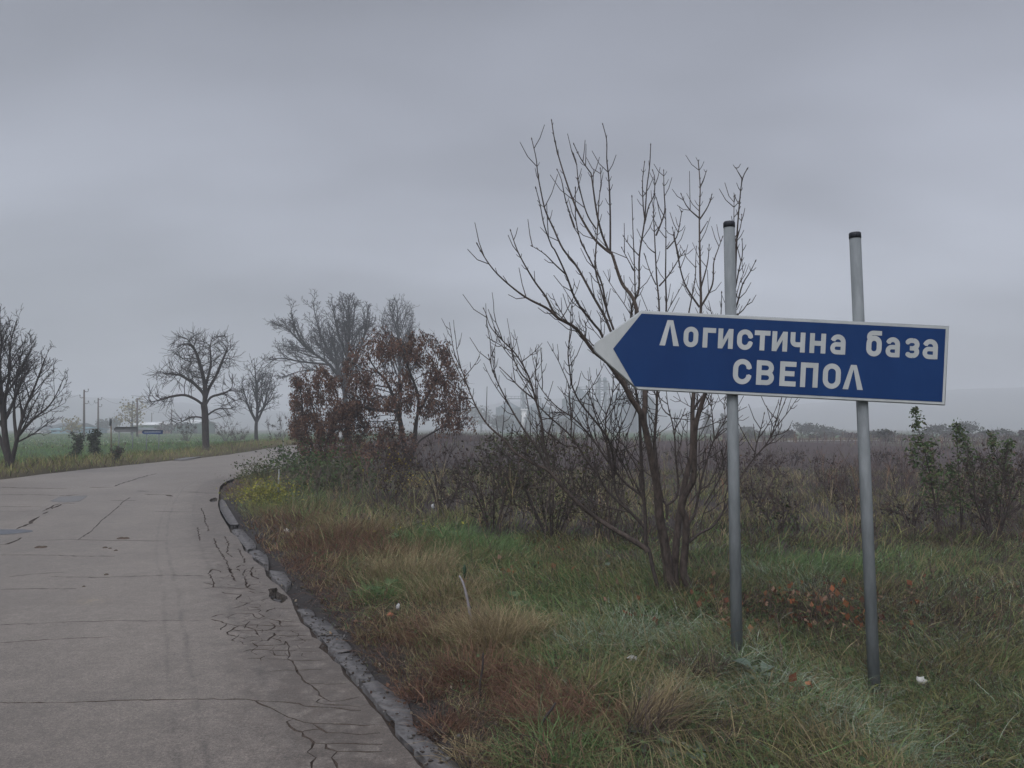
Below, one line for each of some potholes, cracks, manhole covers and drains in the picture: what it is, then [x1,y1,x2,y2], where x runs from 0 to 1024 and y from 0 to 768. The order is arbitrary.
pothole [268,588,288,603]
crack [1,508,382,768]
